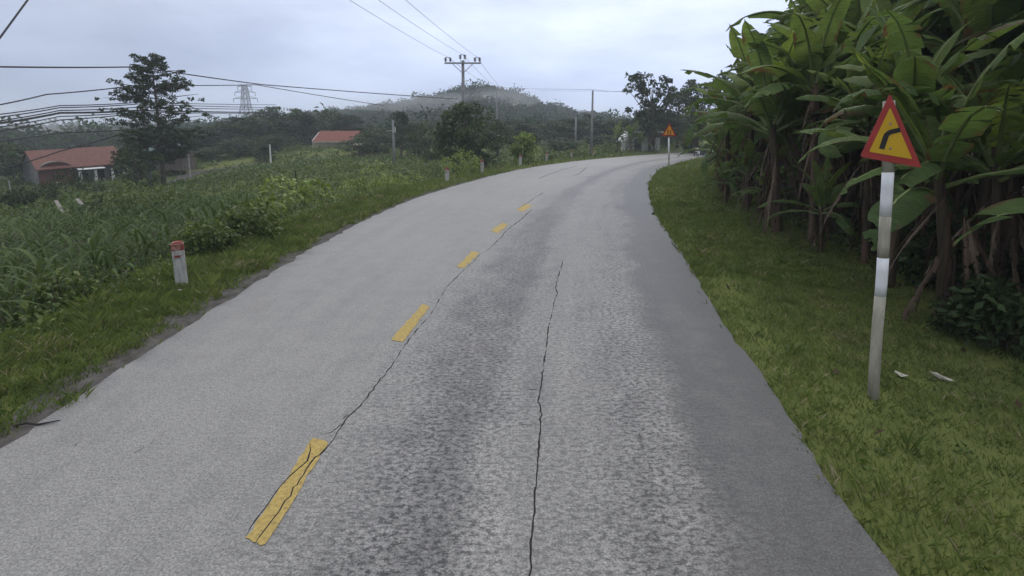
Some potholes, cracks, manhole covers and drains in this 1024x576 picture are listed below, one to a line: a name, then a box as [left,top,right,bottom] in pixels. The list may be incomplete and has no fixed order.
crack [247,166,587,545]
